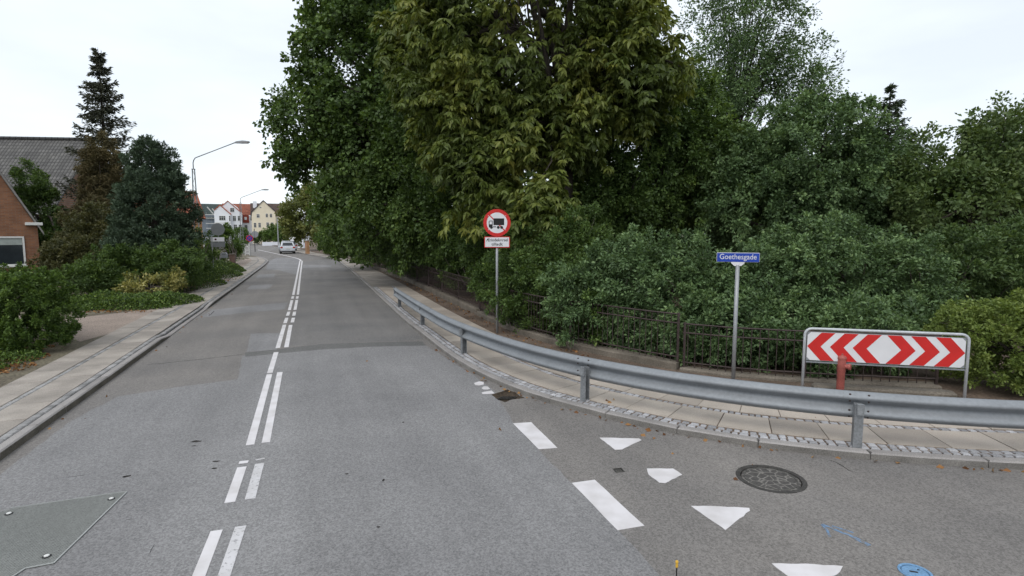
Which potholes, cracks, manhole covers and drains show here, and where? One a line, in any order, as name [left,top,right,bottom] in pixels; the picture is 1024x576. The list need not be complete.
manhole cover [897,563,933,576]
manhole cover [736,465,808,494]
